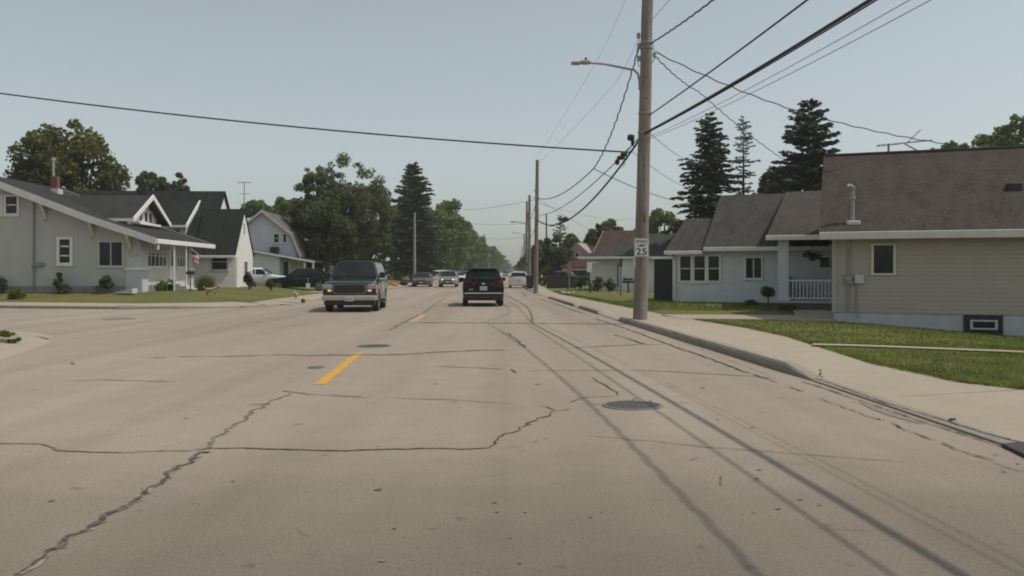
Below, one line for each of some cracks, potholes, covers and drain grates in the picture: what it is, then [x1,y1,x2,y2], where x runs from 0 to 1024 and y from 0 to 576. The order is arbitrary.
manhole cover [602,400,664,411]
crack [883,419,1022,472]
crack [15,378,651,574]
